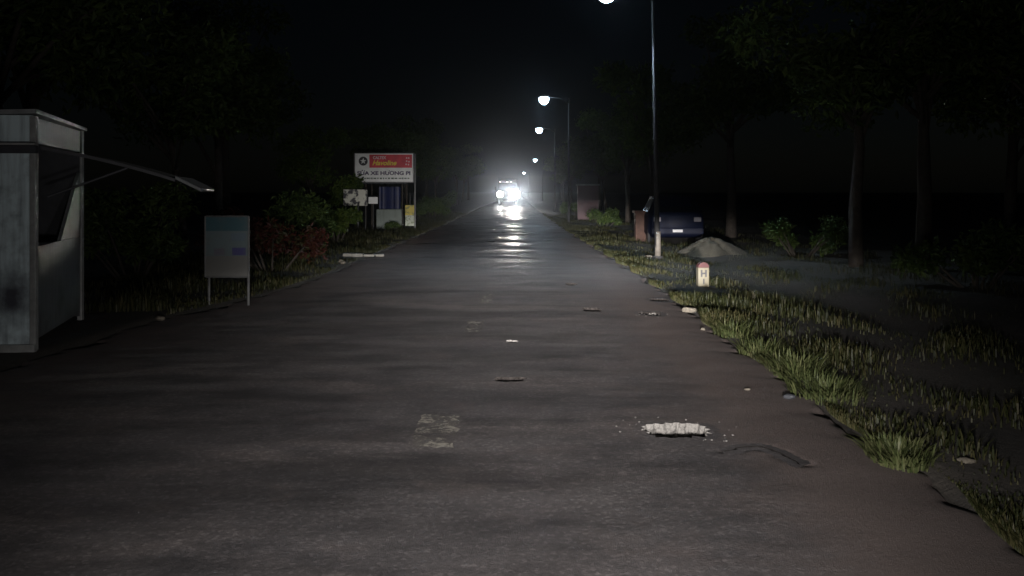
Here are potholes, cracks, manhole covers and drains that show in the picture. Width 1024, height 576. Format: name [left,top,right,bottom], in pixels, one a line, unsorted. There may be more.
pothole [616,417,734,442]
crack [718,443,811,468]
pothole [486,375,534,384]
